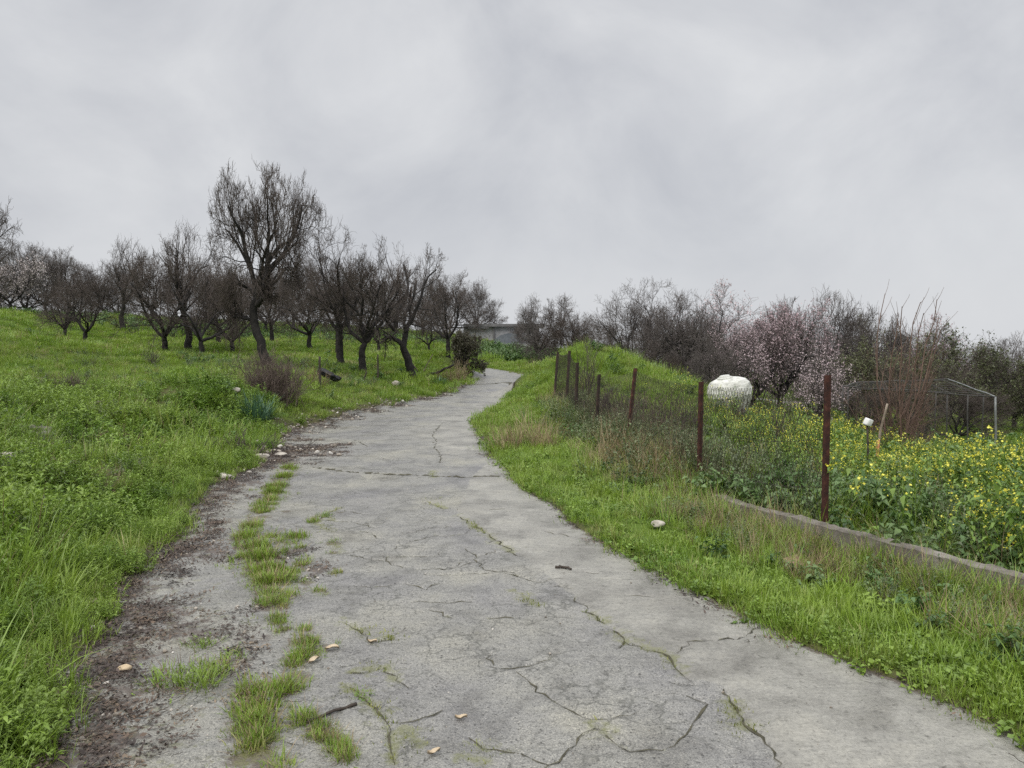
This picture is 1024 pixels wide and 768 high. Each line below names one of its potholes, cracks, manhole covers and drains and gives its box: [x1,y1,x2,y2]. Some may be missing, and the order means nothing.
crack [468,652,782,768]
crack [340,625,442,764]
crack [314,425,493,477]
crack [324,502,753,685]
